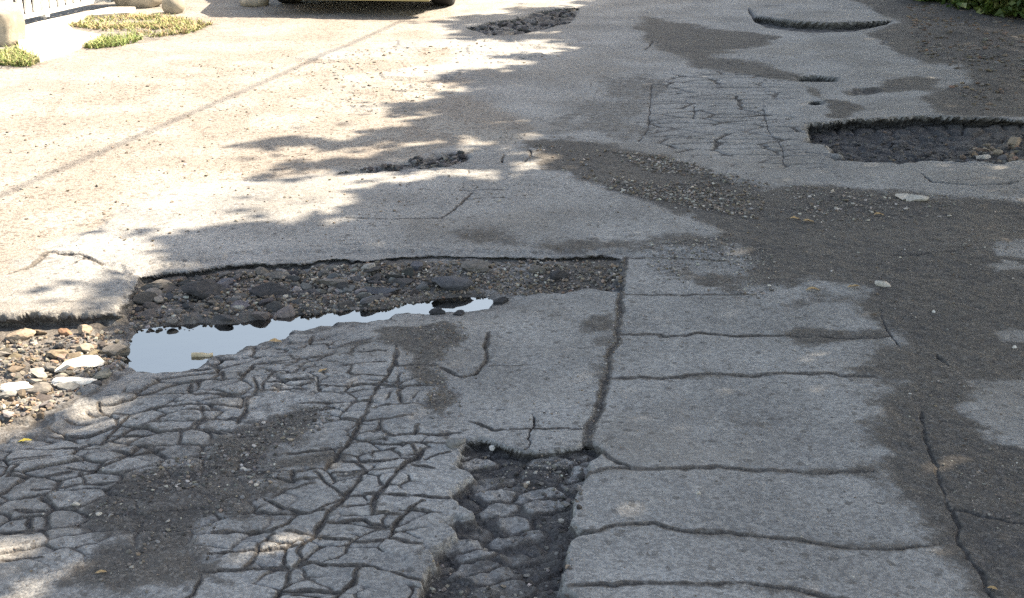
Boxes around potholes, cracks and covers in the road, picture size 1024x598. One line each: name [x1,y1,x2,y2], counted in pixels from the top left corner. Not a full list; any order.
pothole [805,117,1024,165]
crack [473,408,513,432]
